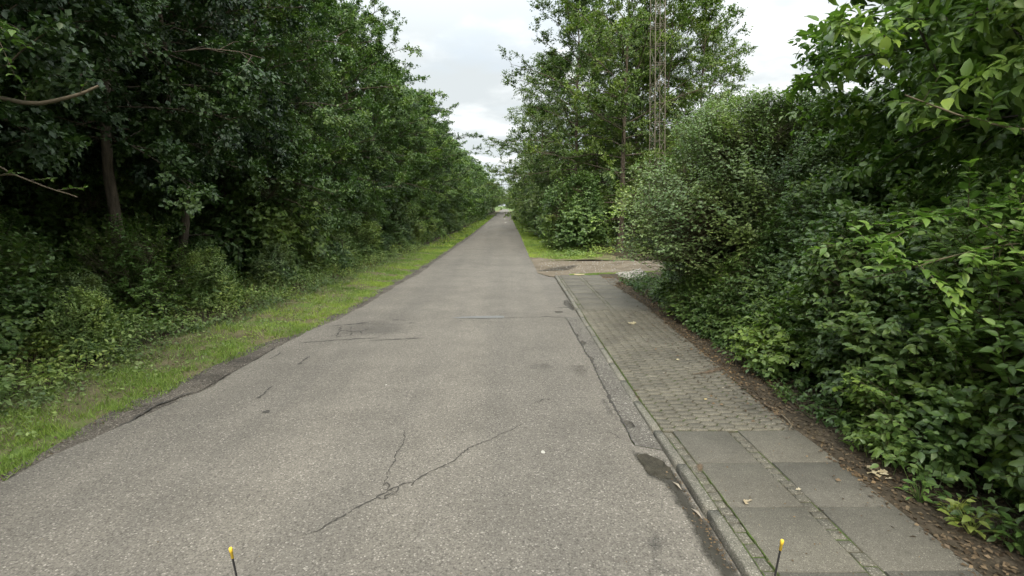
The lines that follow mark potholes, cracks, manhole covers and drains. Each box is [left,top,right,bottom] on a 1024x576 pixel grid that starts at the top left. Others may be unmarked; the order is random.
crack [303,425,520,535]
crack [555,307,635,444]
crack [112,391,193,430]
